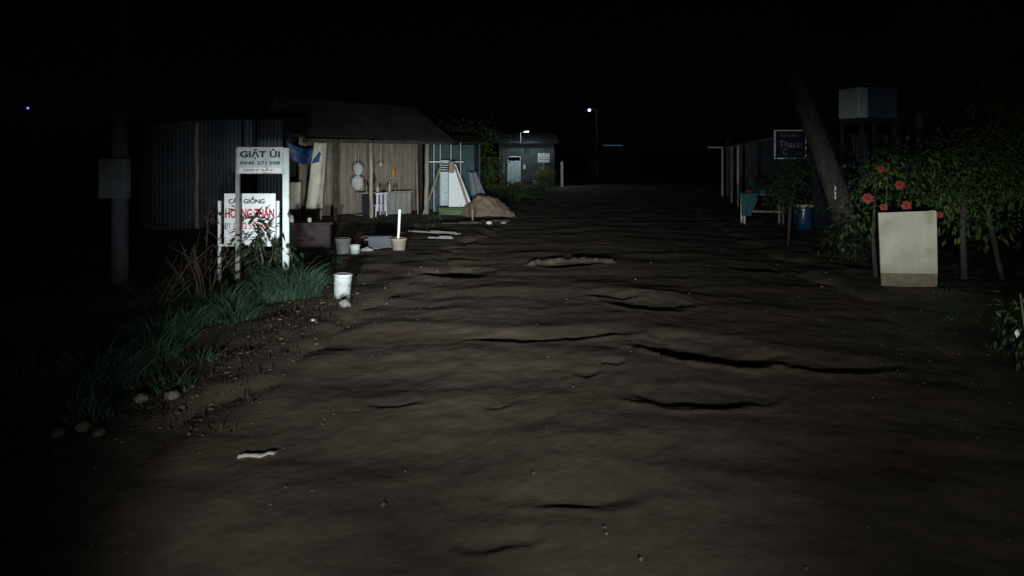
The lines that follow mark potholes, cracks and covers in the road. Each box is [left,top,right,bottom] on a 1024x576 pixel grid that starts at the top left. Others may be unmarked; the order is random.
pothole [534,257,599,268]
